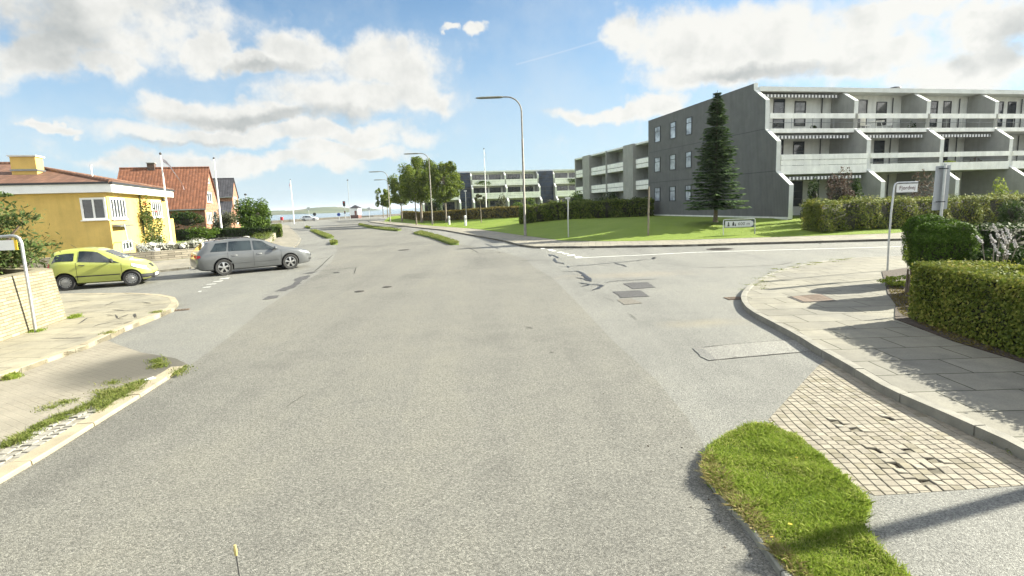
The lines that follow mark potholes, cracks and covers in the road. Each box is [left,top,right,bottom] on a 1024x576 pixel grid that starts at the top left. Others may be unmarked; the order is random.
manhole cover [789,294,836,303]
